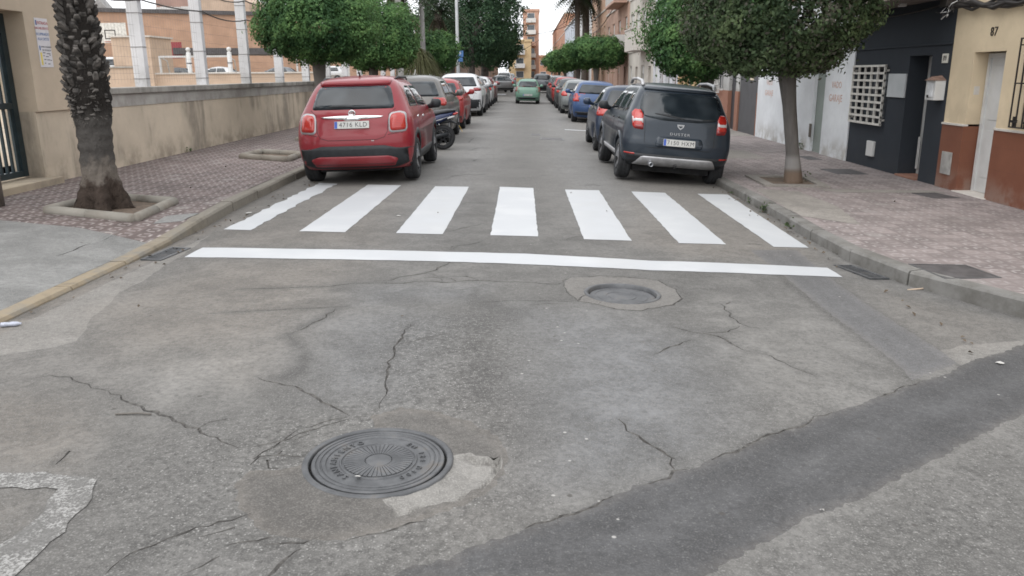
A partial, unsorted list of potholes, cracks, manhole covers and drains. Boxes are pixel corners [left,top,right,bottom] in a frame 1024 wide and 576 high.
manhole cover [301,428,453,499]
manhole cover [584,283,661,304]
manhole cover [909,264,1002,279]
crack [210,306,348,334]
drain grate [140,247,191,261]
drain grate [834,265,890,280]
crack [30,375,368,469]
crack [105,513,424,576]
crack [654,302,815,376]
crack [619,419,676,469]
crack [379,325,447,409]
